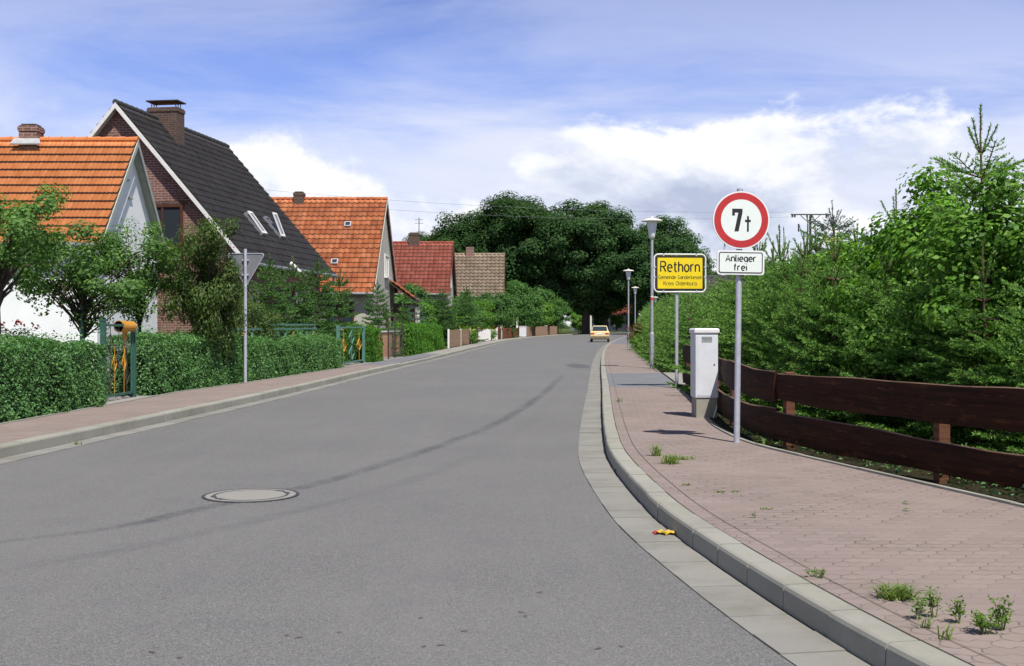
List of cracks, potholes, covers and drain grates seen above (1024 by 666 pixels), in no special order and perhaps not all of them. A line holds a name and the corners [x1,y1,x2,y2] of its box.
manhole cover [201,488,299,503]
